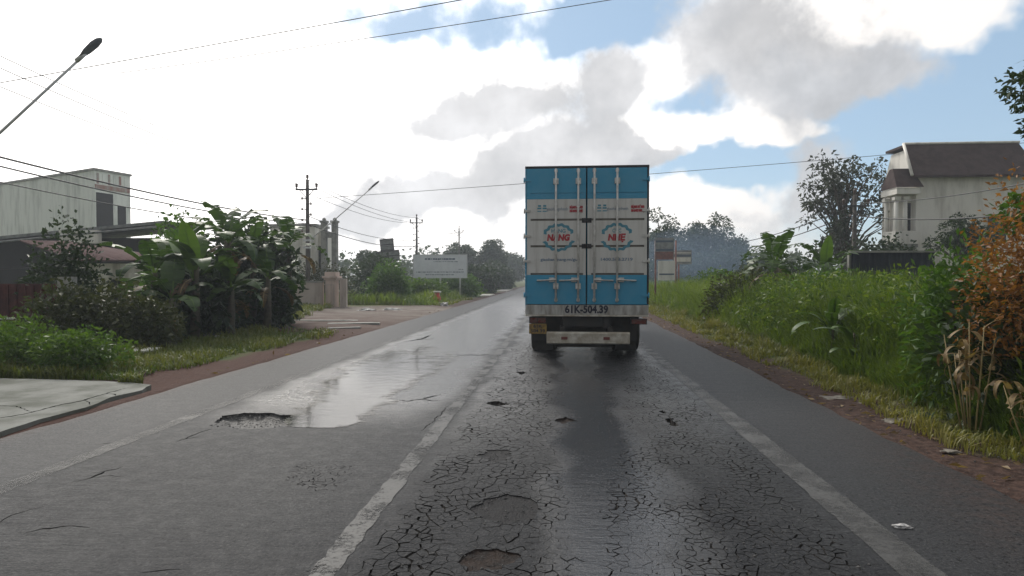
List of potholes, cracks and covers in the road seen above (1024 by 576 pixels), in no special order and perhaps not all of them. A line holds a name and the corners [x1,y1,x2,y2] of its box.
pothole [215,413,295,429]
crack [282,462,352,491]
pothole [469,494,543,524]
crack [347,340,585,576]
crack [0,507,90,533]
crack [599,350,867,576]
pothole [459,548,521,572]
